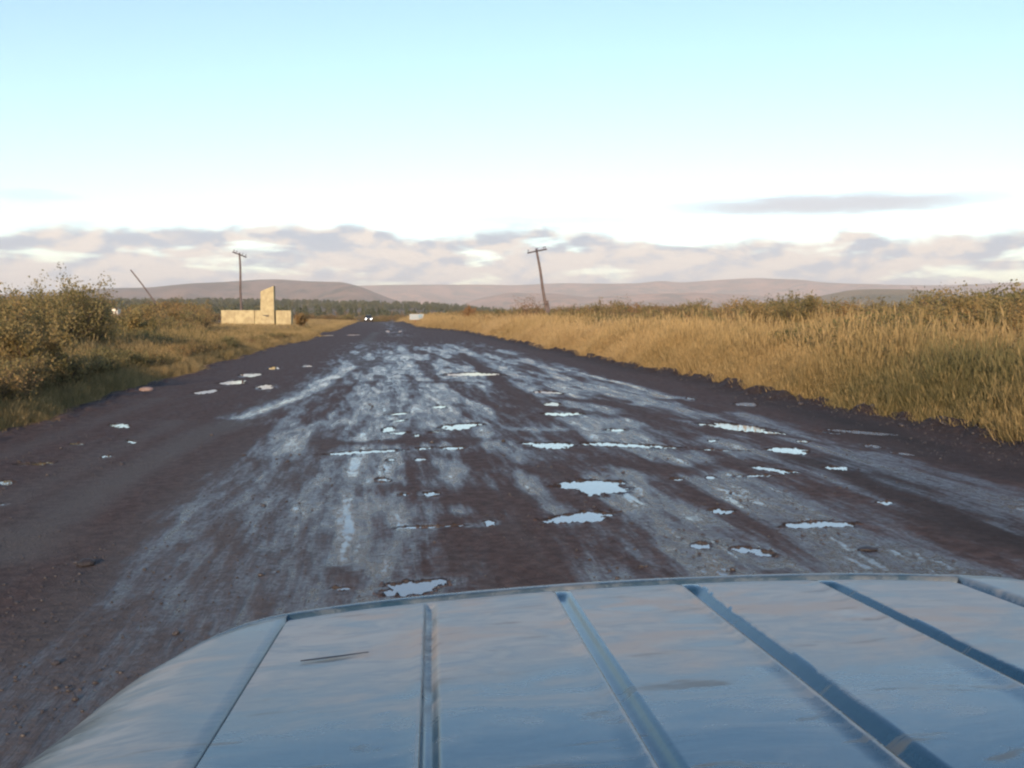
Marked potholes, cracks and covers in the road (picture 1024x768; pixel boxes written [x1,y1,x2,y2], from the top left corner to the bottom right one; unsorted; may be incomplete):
pothole [571,440,706,450]
pothole [682,540,720,551]
pothole [742,446,821,455]
pothole [429,422,490,431]
pothole [510,441,591,452]
pothole [682,421,802,436]
pothole [721,544,791,559]
pothole [768,519,871,529]
pothole [532,508,625,527]
pothole [366,576,468,599]
pothole [212,378,252,386]
pothole [305,448,415,456]
